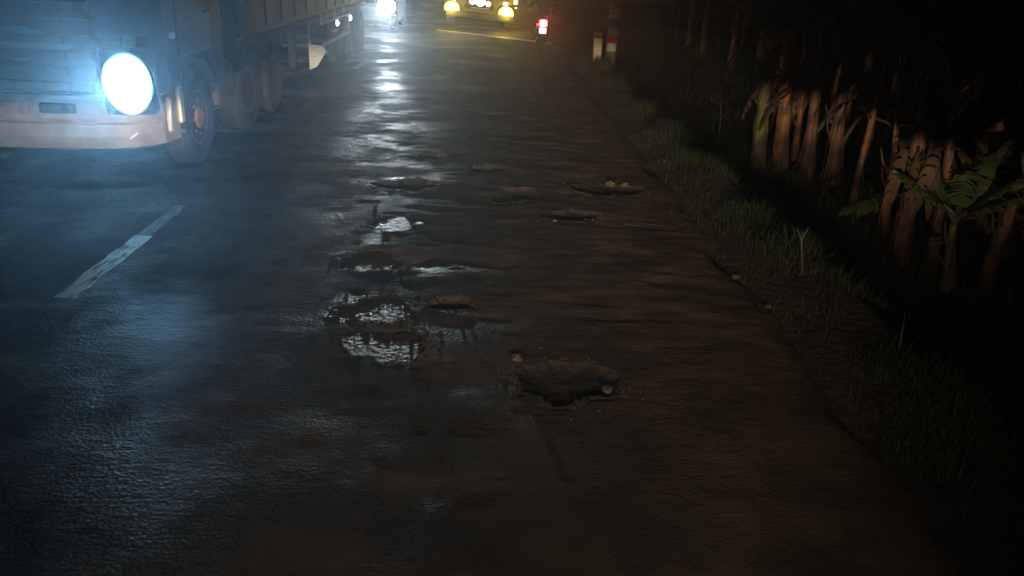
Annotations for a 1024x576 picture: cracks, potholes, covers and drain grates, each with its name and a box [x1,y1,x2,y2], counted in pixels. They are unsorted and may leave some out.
pothole [533,208,613,224]
pothole [483,185,543,205]
pothole [493,346,645,421]
pothole [357,212,437,240]
pothole [328,244,416,278]
pothole [353,176,444,193]
pothole [311,321,442,369]
pothole [556,181,664,200]
pothole [299,288,424,327]
pothole [405,150,465,161]
pothole [464,162,510,176]
pothole [415,290,488,318]
